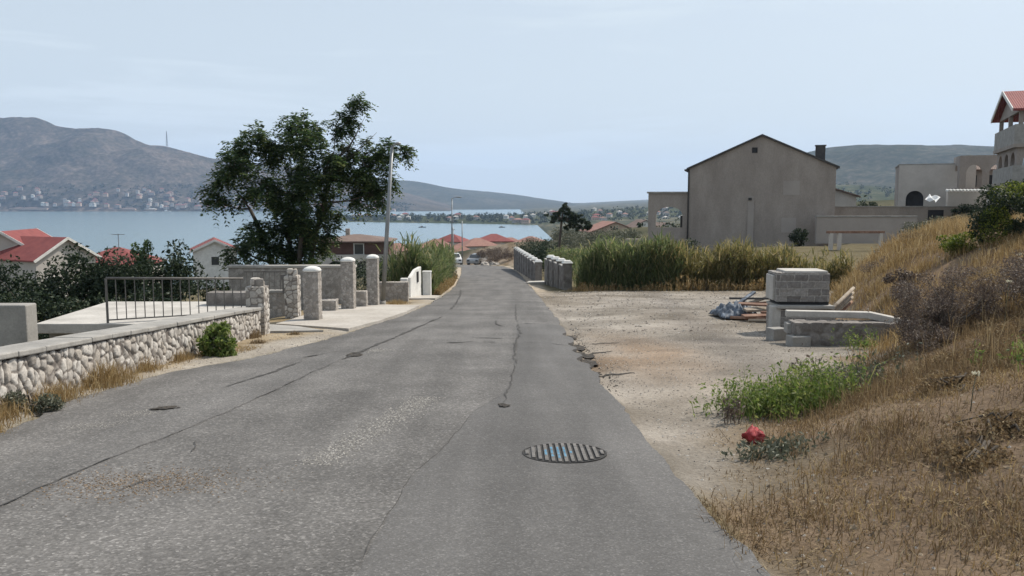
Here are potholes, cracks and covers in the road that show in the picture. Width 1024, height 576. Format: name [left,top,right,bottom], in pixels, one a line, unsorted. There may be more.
crack [1,290,462,505]
crack [447,305,521,399]
